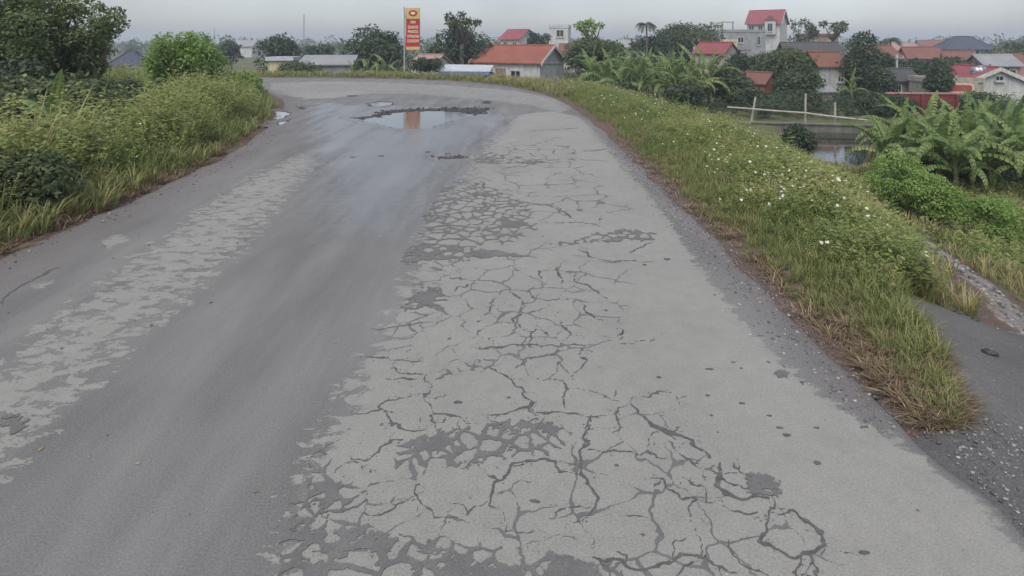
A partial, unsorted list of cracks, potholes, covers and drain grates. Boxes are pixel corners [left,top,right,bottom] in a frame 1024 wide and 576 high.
pothole [357,100,403,108]
pothole [424,153,480,161]
pothole [340,107,500,132]
crack [0,267,59,303]
crack [276,127,858,576]
